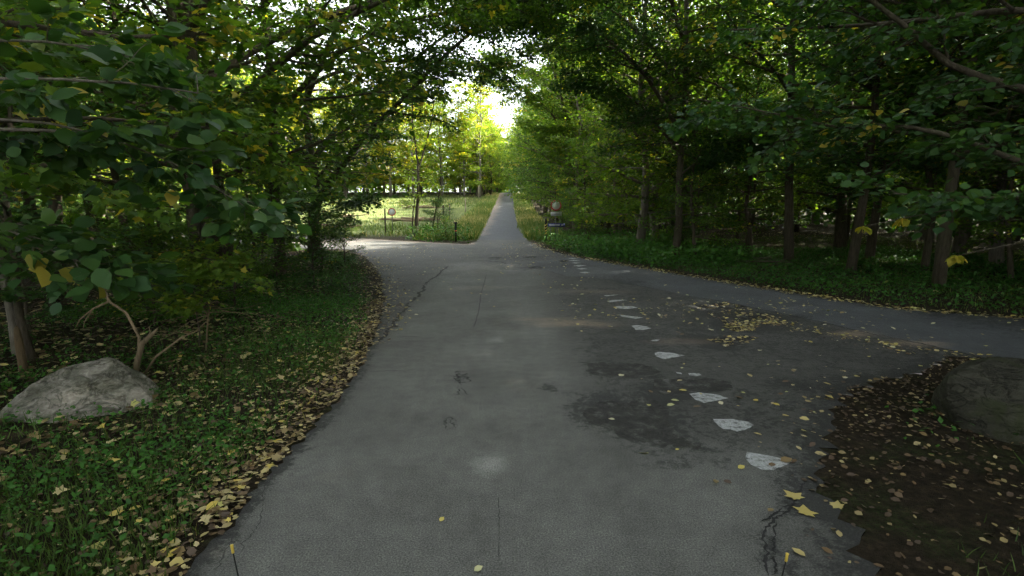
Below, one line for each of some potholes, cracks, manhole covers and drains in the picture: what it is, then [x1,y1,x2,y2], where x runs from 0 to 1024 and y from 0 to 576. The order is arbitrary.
crack [378,266,449,342]
crack [754,478,805,576]
crack [212,471,274,572]
